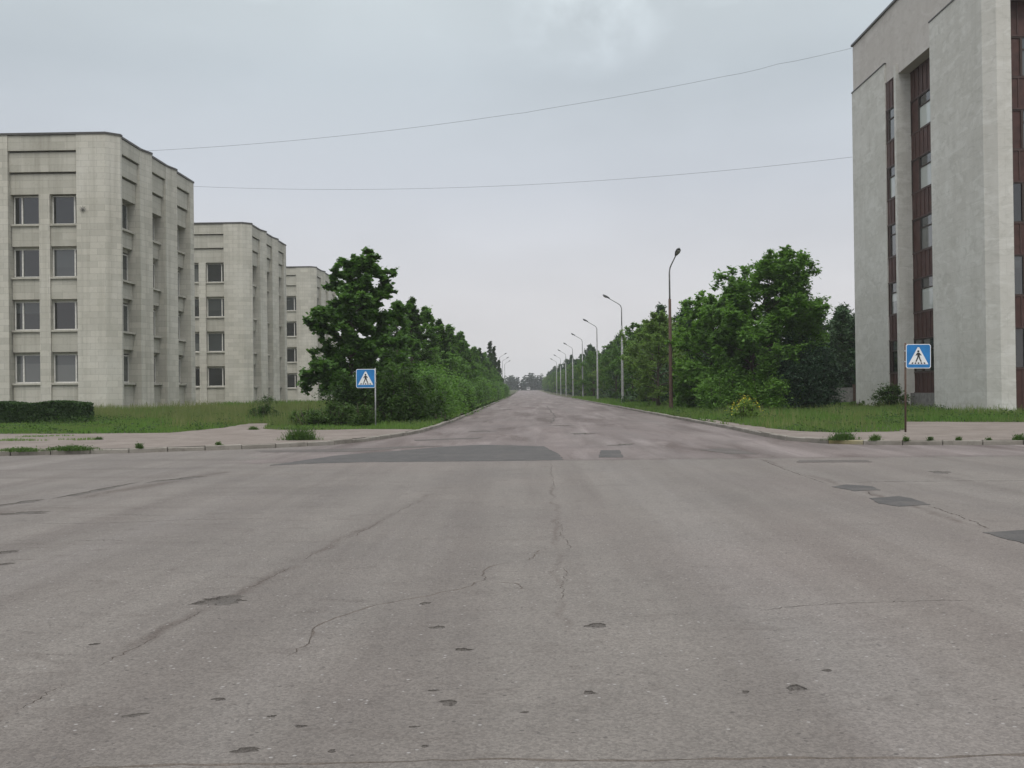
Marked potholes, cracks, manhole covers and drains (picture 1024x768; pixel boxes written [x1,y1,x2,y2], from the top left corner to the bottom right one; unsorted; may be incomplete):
crack [557,521,571,598]
pothole [188,595,247,606]
crack [755,600,966,612]
